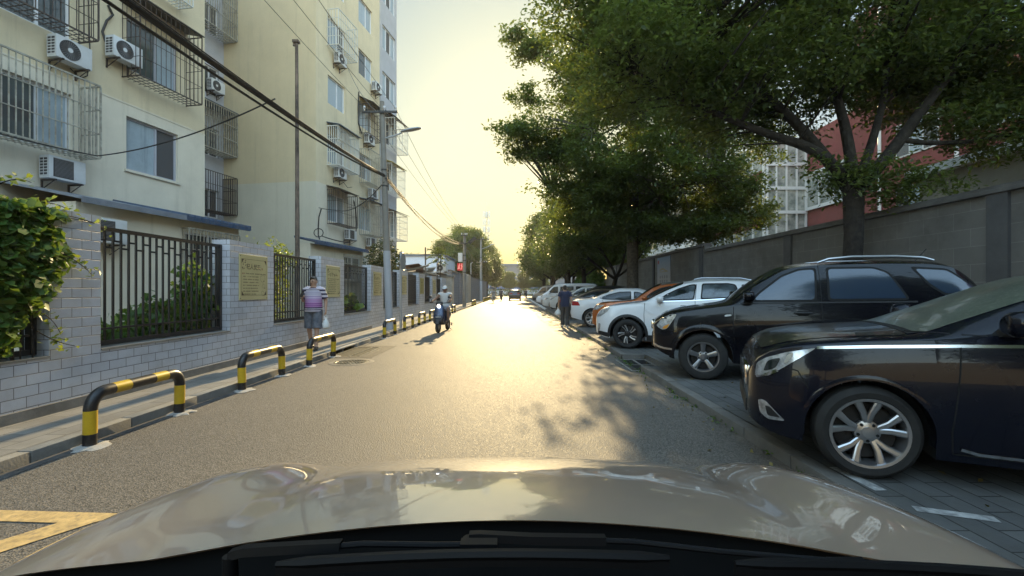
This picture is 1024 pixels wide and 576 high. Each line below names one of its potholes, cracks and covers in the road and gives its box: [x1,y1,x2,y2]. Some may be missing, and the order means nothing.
drain grate [614,354,673,371]
